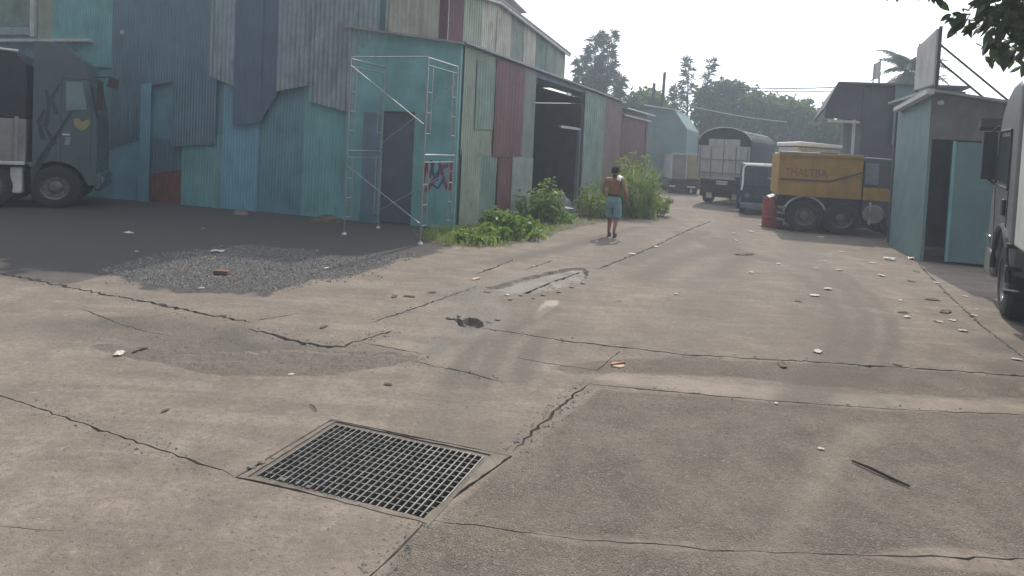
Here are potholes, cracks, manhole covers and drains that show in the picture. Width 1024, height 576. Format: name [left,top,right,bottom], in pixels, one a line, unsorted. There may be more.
drain grate [235,419,512,525]
crack [600,221,711,269]
pothole [486,268,589,294]
pothole [454,317,484,329]
